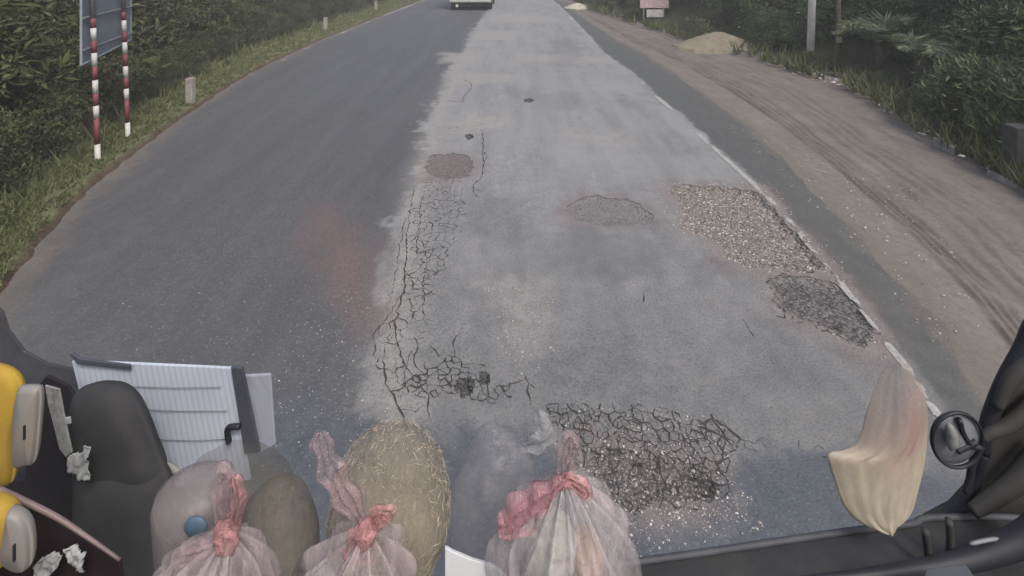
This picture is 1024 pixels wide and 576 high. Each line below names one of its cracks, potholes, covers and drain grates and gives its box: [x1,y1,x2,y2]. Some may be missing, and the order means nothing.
crack [372,177,827,510]
pothole [655,182,843,285]
crack [448,127,487,196]
